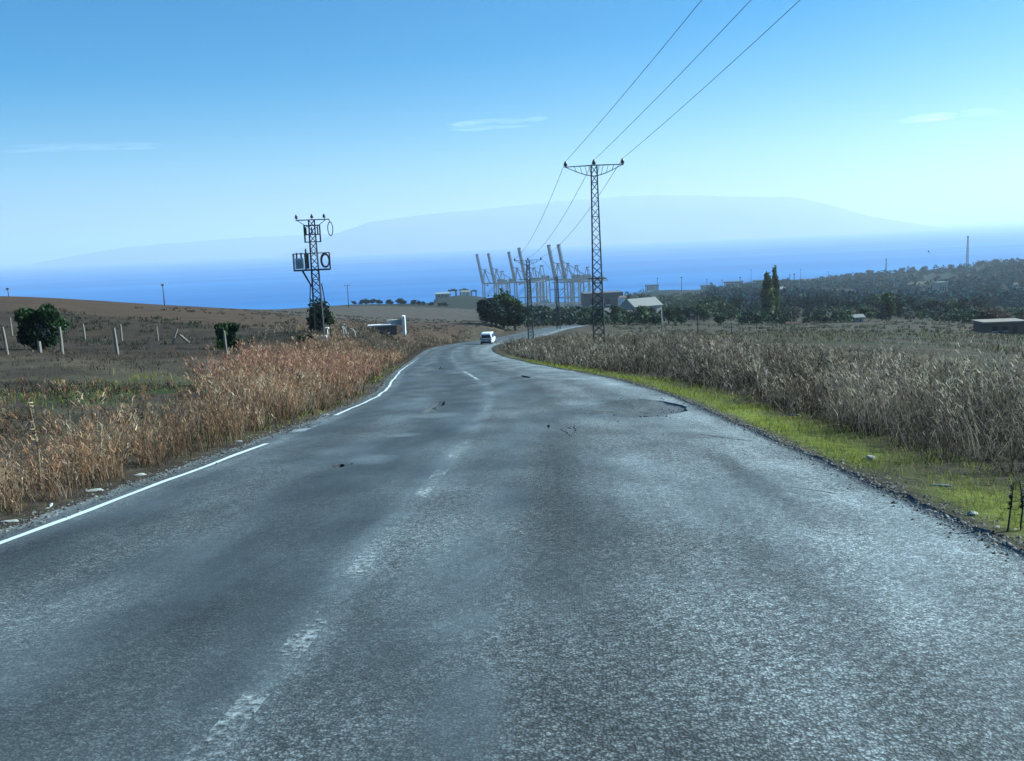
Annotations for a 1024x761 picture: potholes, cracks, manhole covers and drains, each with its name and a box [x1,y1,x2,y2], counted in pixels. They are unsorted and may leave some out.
pothole [573,398,698,422]
pothole [419,401,445,413]
